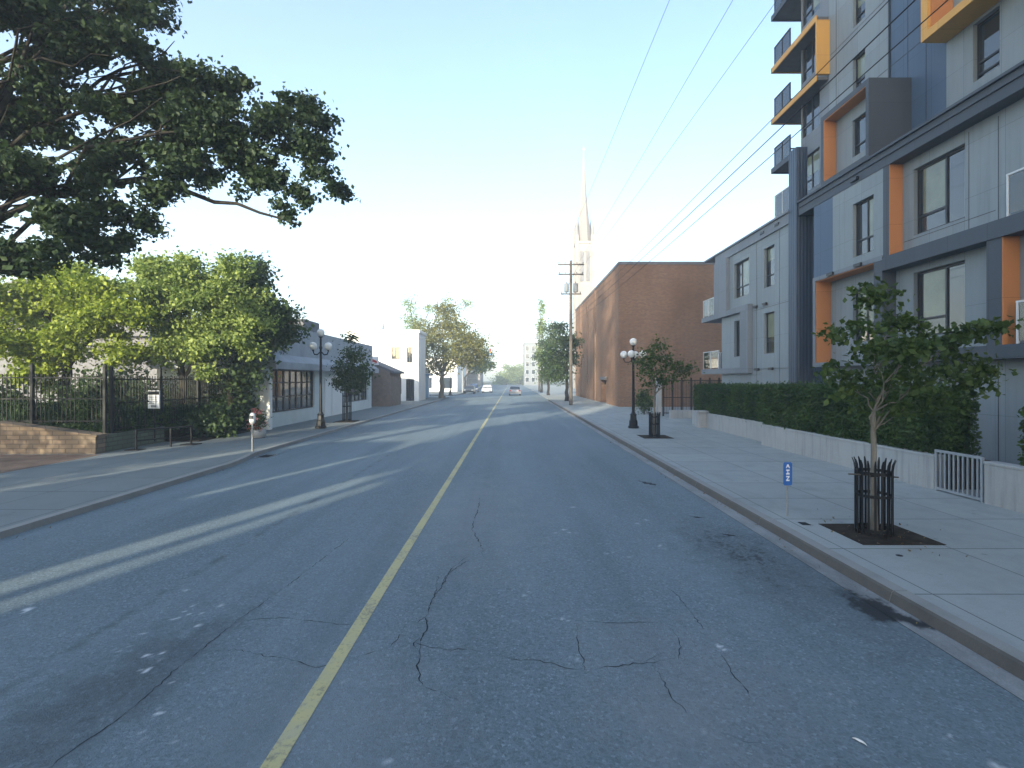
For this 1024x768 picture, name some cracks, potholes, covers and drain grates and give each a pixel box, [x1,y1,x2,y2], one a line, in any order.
crack [514,620,686,711]
crack [51,539,349,767]
